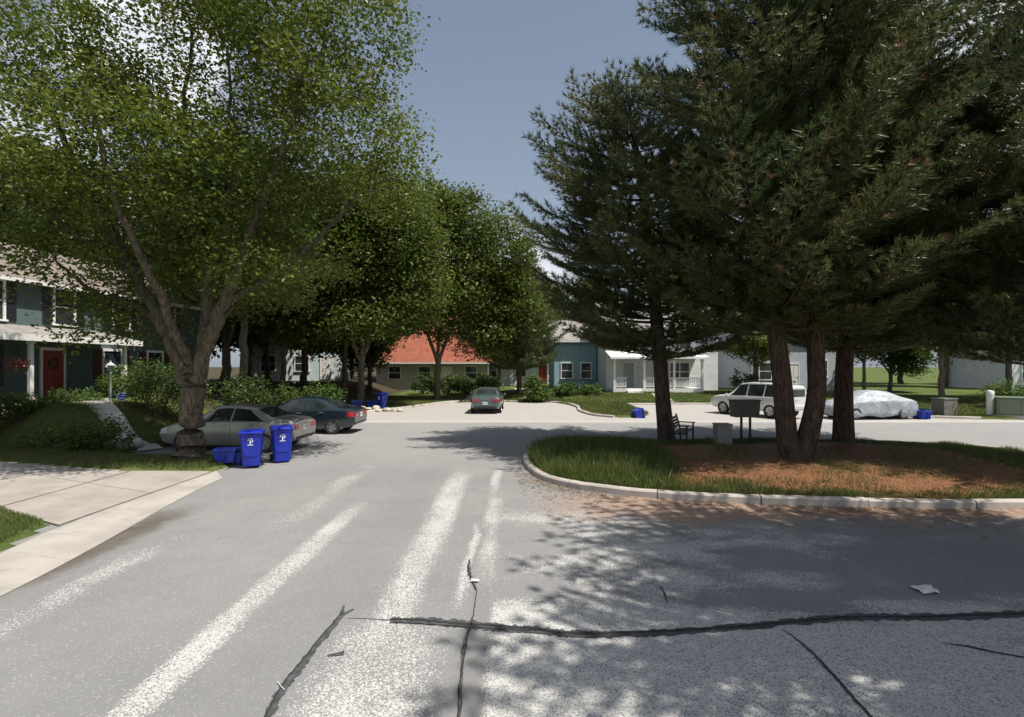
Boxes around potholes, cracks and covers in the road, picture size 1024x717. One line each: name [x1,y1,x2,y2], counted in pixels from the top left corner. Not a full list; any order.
crack [784,630,873,717]
crack [945,643,1024,658]
crack [457,558,477,717]
